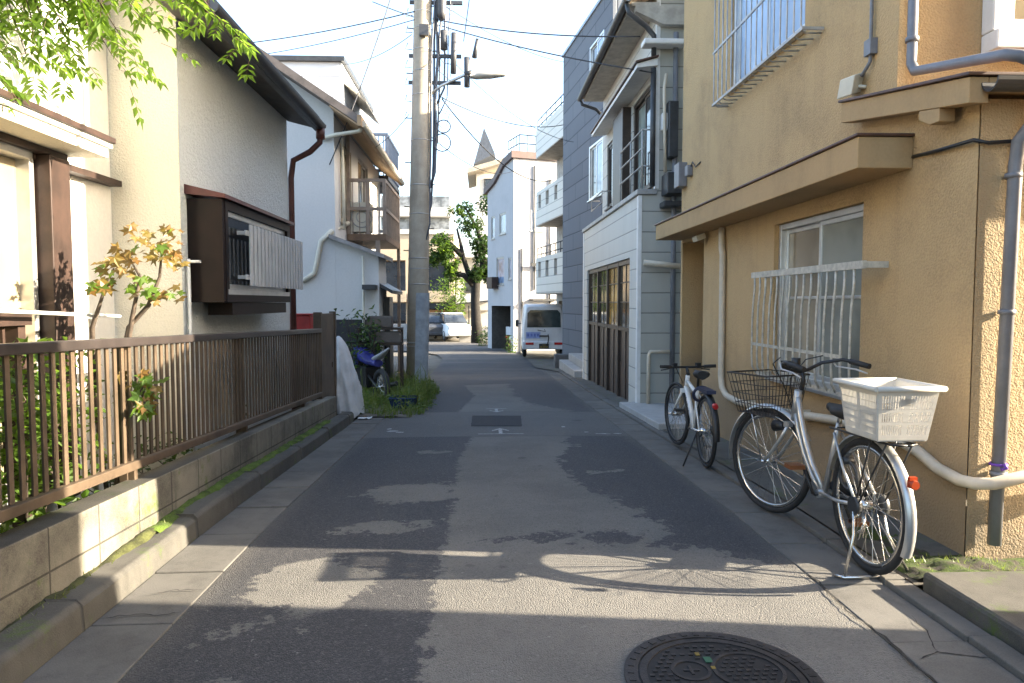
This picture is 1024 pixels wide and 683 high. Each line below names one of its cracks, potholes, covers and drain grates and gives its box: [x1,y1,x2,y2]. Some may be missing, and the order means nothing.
manhole cover [624,632,824,683]
crack [914,618,989,659]
